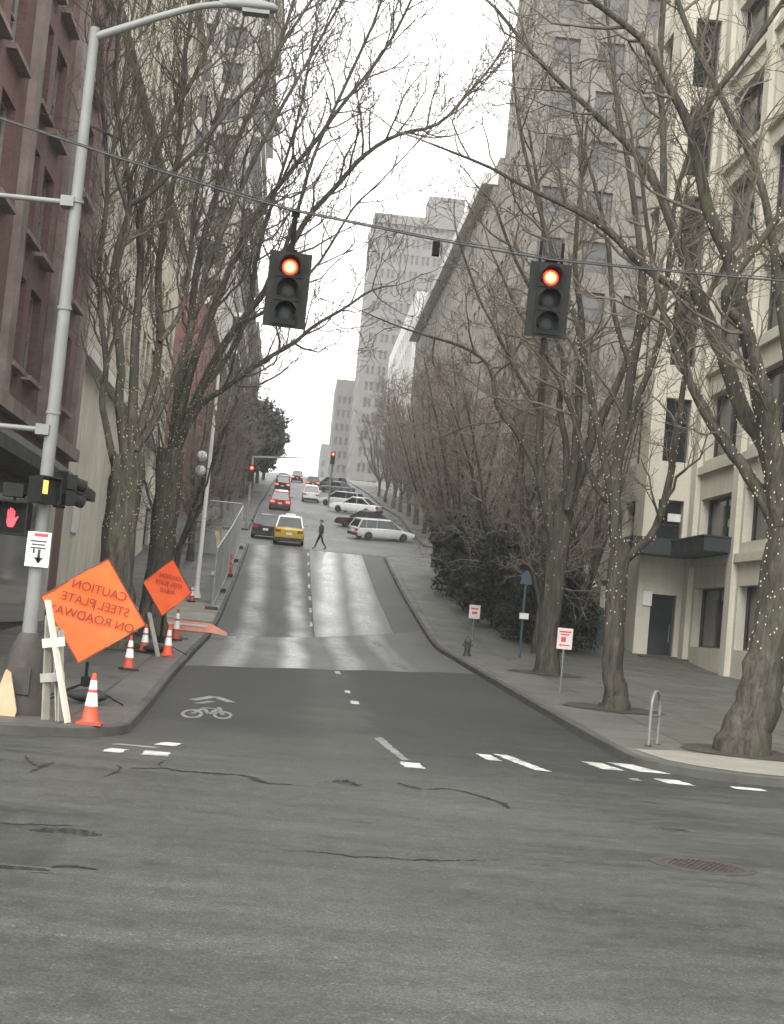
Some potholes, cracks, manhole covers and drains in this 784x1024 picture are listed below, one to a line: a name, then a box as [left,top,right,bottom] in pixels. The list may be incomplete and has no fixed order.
crack [105,760,292,785]
pothole [16,826,115,839]
crack [280,849,485,861]
crack [25,755,54,772]
manhole cover [650,856,757,876]
crack [398,783,512,809]
